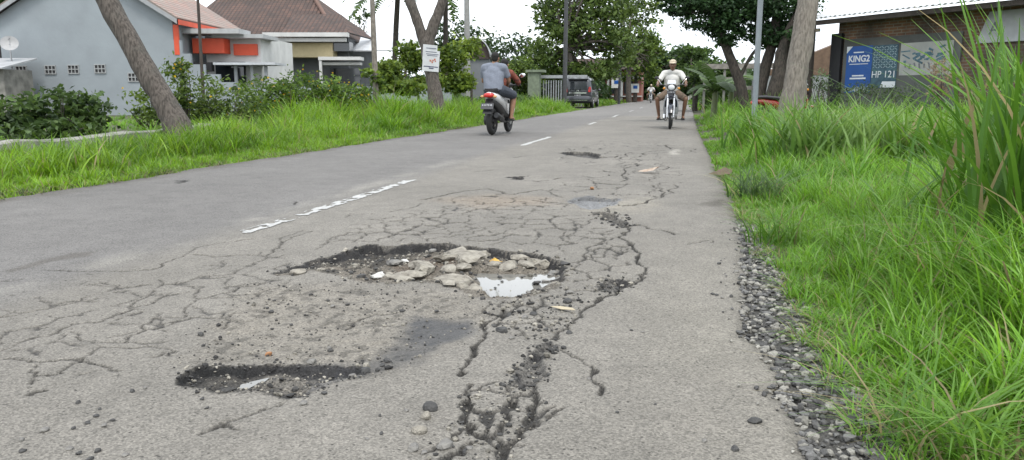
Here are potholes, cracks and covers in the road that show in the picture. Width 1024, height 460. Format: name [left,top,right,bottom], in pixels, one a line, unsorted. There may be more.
pothole [273,243,568,300]
pothole [175,363,367,400]
crack [574,227,647,275]
pothole [560,151,607,159]
pothole [592,211,629,229]
crack [423,291,621,460]
